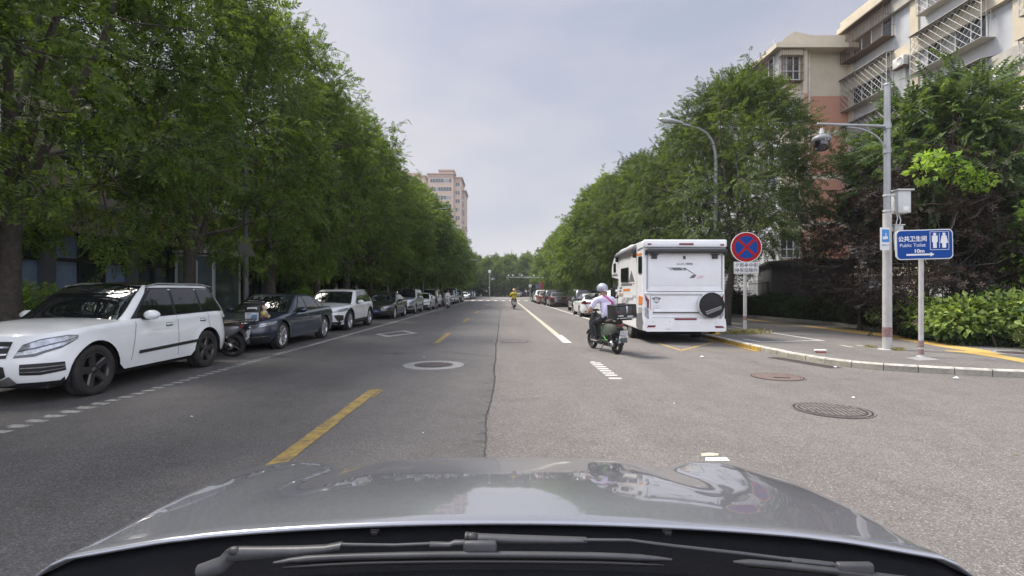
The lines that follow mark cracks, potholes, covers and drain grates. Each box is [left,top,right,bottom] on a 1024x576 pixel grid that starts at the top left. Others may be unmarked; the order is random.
manhole cover [749,372,806,381]
crack [457,311,501,456]
manhole cover [403,361,464,370]
manhole cover [791,402,877,418]
